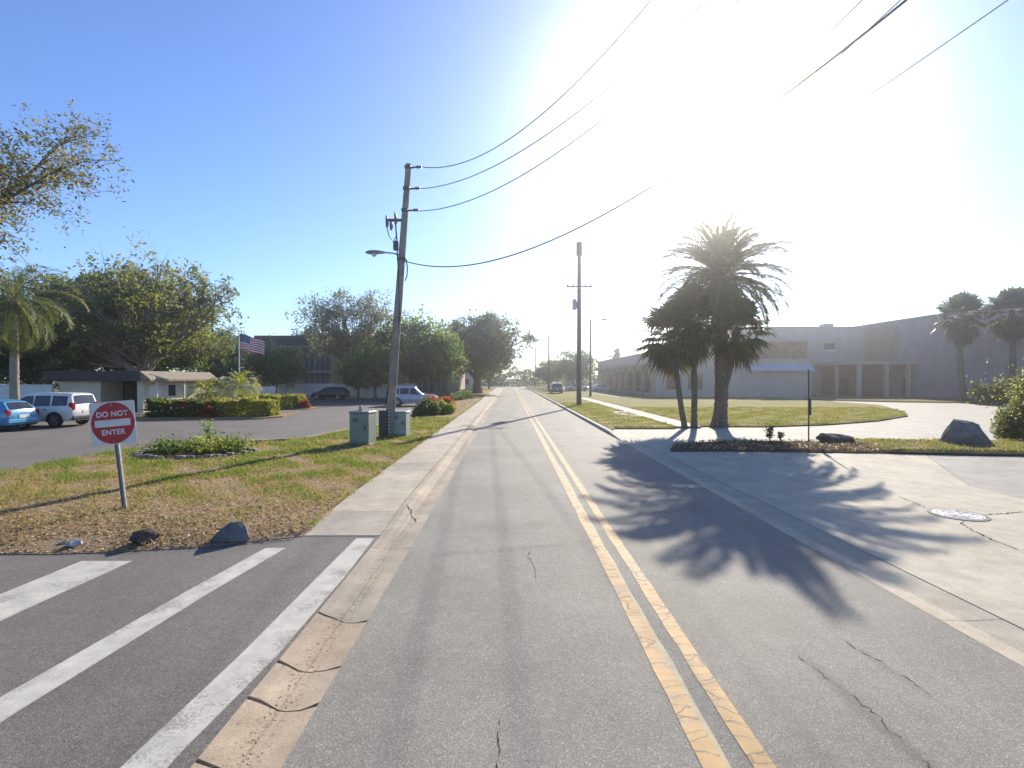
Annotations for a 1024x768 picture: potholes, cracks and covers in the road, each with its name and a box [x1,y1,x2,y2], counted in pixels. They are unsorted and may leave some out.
crack [797,654,930,768]
manhole cover [927,508,991,522]
